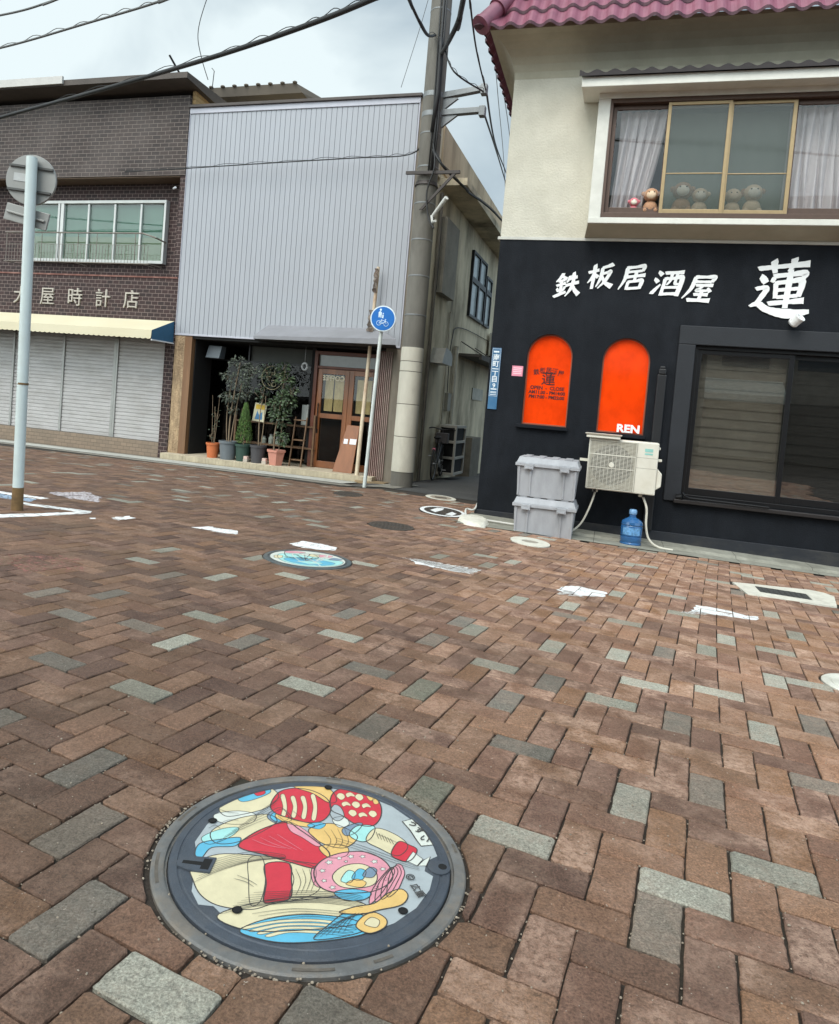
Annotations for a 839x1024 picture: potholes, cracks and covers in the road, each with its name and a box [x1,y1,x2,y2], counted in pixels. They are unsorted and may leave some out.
manhole cover [149,776,466,982]
utility cover [510,536,550,548]
manhole cover [368,521,414,531]
manhole cover [420,506,465,518]
manhole cover [263,550,352,570]
